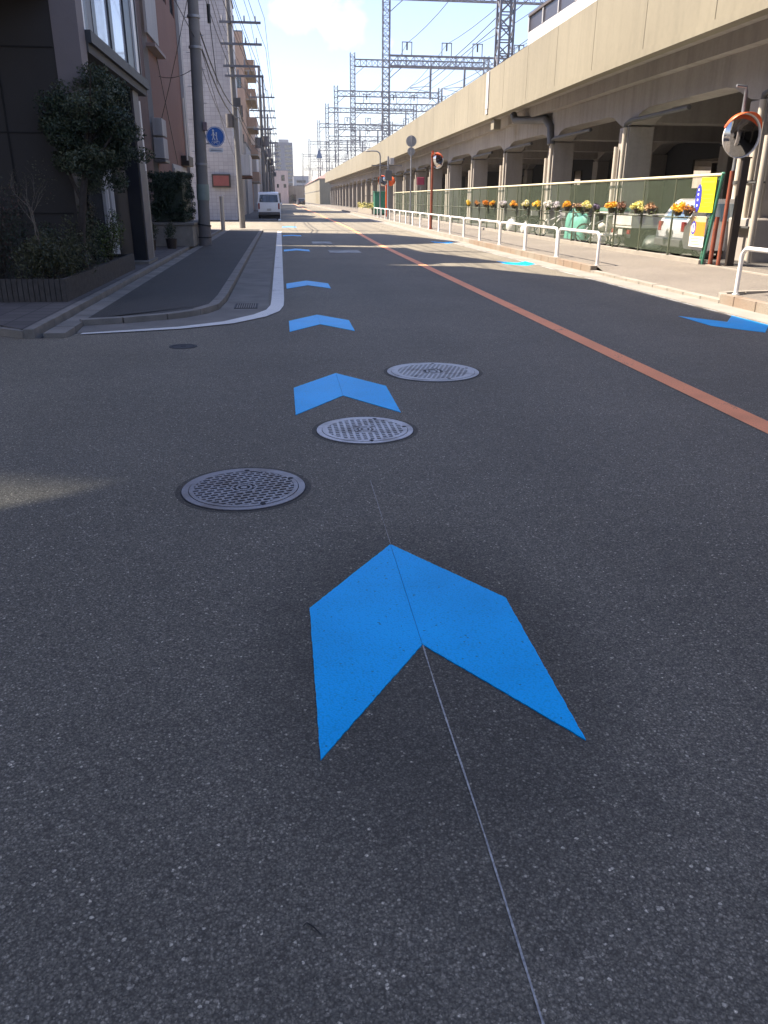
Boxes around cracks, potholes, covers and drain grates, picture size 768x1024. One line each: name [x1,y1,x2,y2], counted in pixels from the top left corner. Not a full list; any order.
manhole cover [312,416,418,445]
manhole cover [175,467,311,513]
manhole cover [383,362,483,383]
